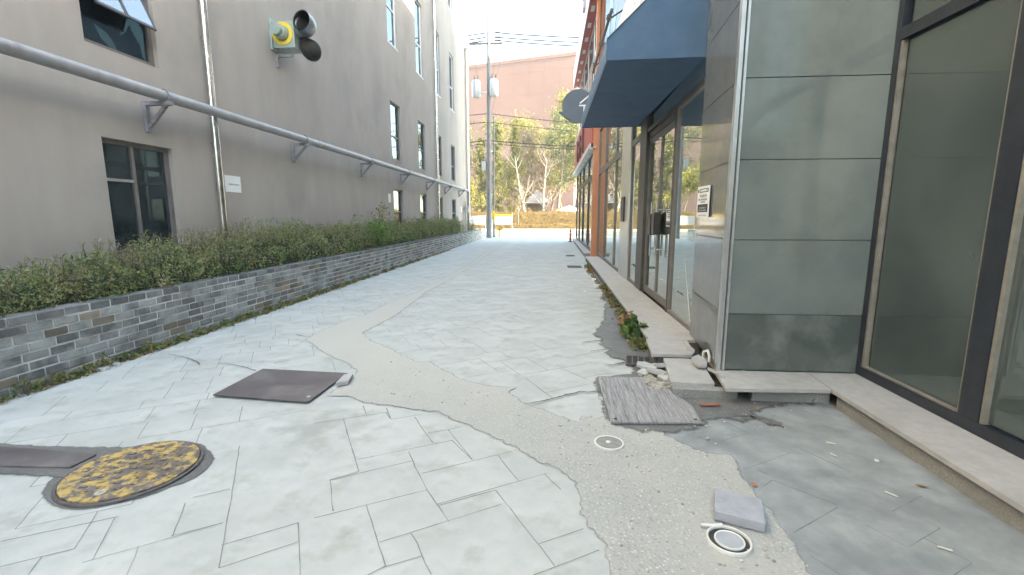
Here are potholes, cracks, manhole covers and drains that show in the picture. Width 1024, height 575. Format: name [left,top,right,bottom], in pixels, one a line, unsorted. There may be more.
drain grate [625,355,652,366]
manhole cover [51,440,204,508]
